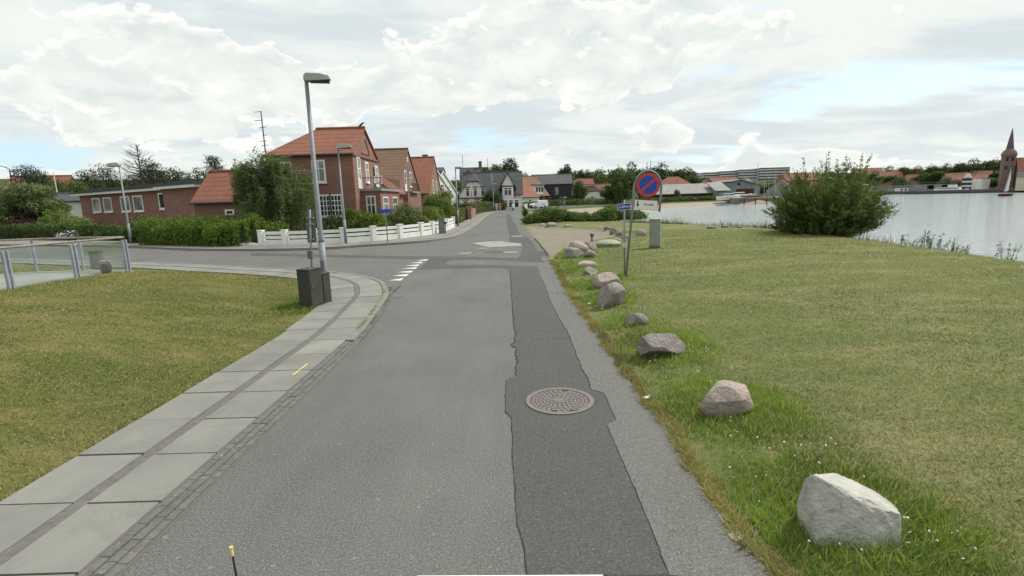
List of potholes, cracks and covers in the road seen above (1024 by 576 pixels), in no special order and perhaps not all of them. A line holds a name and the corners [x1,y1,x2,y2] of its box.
manhole cover [526,388,594,415]
